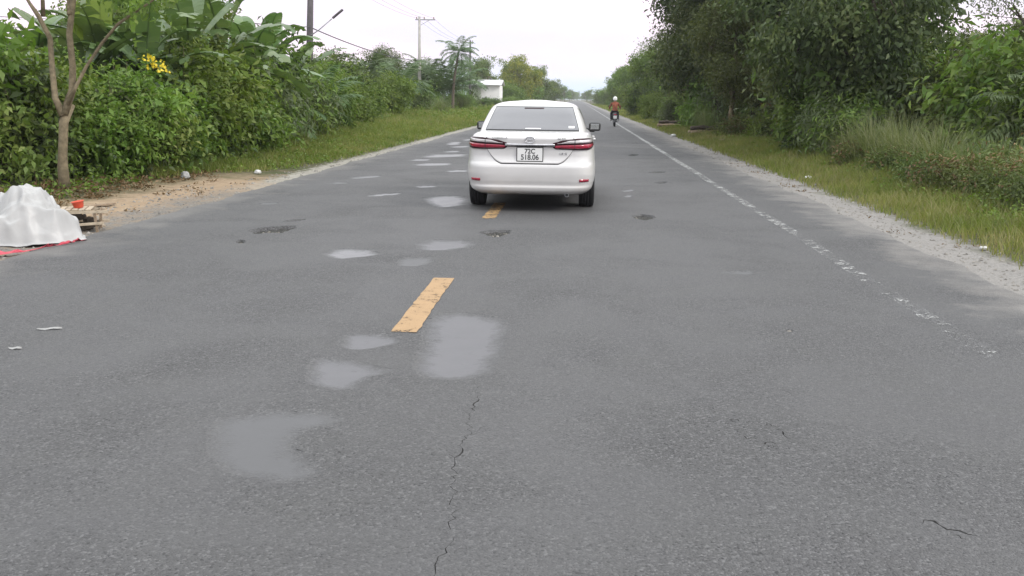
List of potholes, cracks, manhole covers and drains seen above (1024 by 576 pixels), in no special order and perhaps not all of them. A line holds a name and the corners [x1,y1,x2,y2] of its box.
pothole [249,225,296,234]
crack [923,519,977,539]
crack [434,394,483,576]
